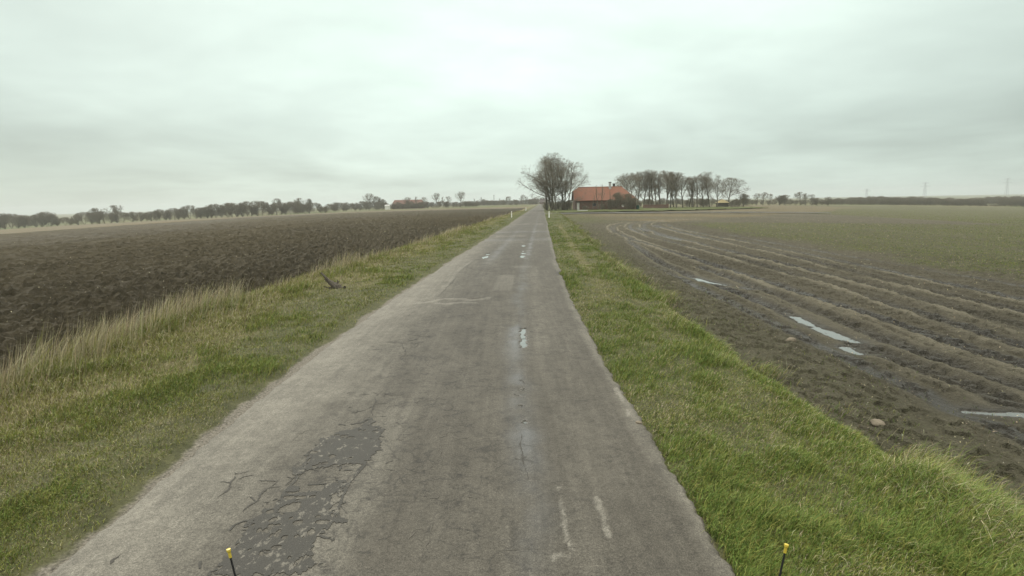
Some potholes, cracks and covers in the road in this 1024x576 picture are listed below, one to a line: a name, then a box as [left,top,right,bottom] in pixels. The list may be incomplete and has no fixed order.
crack [198,390,405,576]
